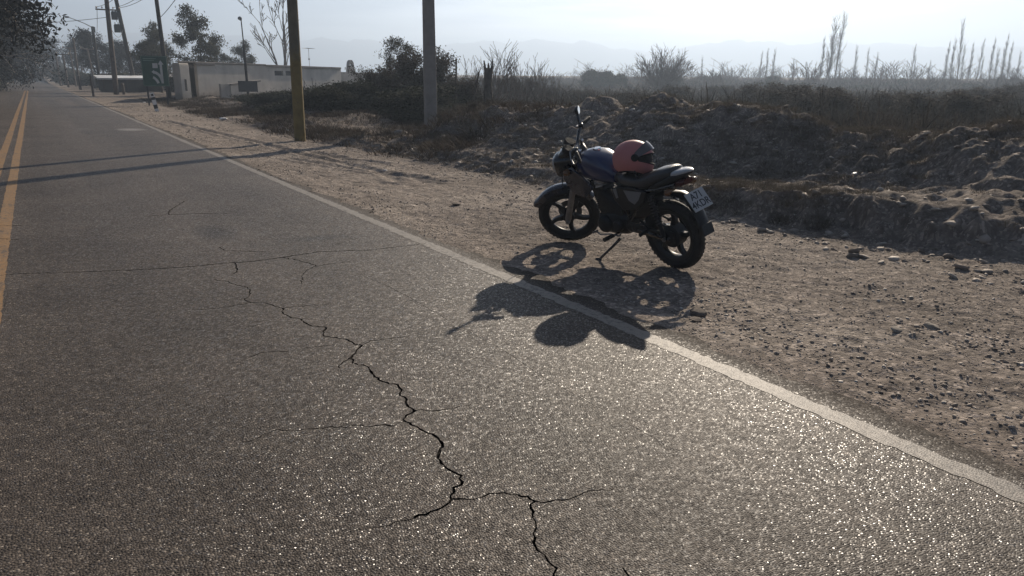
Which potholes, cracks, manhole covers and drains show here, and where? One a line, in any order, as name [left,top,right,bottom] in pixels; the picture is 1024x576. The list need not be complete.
crack [10,244,613,576]
crack [364,276,672,449]
